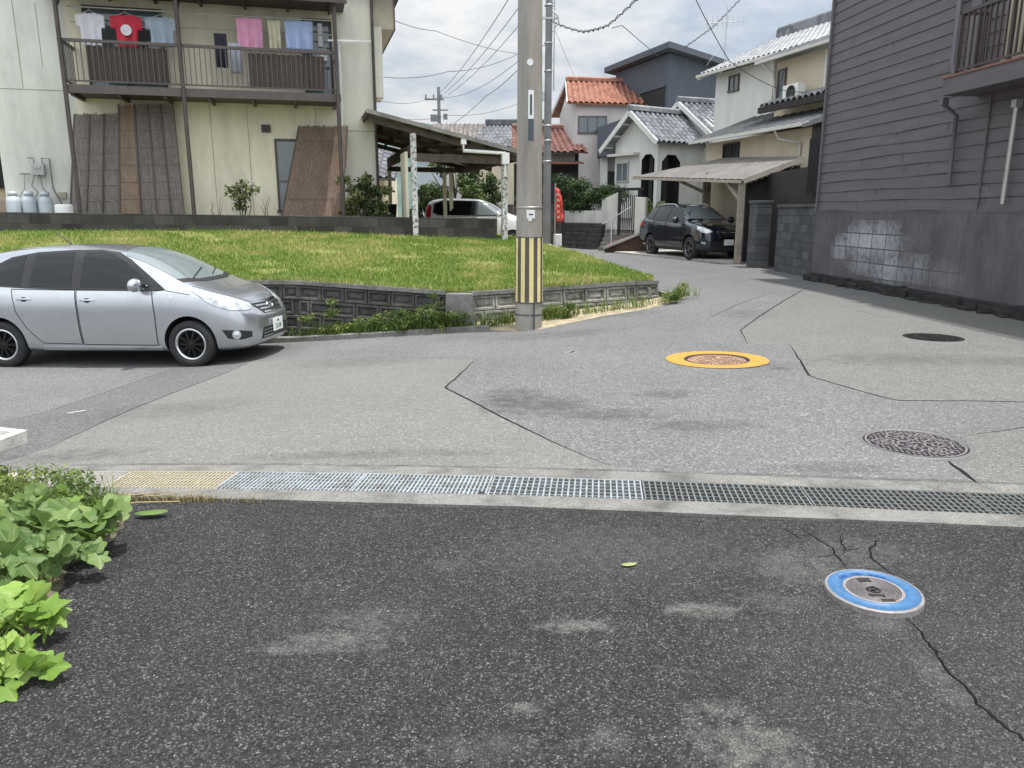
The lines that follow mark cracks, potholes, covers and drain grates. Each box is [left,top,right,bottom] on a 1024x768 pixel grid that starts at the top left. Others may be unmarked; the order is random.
manhole cover [665,351,769,368]
manhole cover [858,428,975,462]
drain grate [967,492,1024,515]
manhole cover [824,569,925,619]
crack [949,461,977,483]
drain grate [105,471,237,489]
crack [904,618,1024,742]
drain grate [215,471,366,491]
drain grate [487,476,643,499]
crack [779,526,896,575]
manhole cover [902,333,965,342]
drain grate [801,486,993,514]
